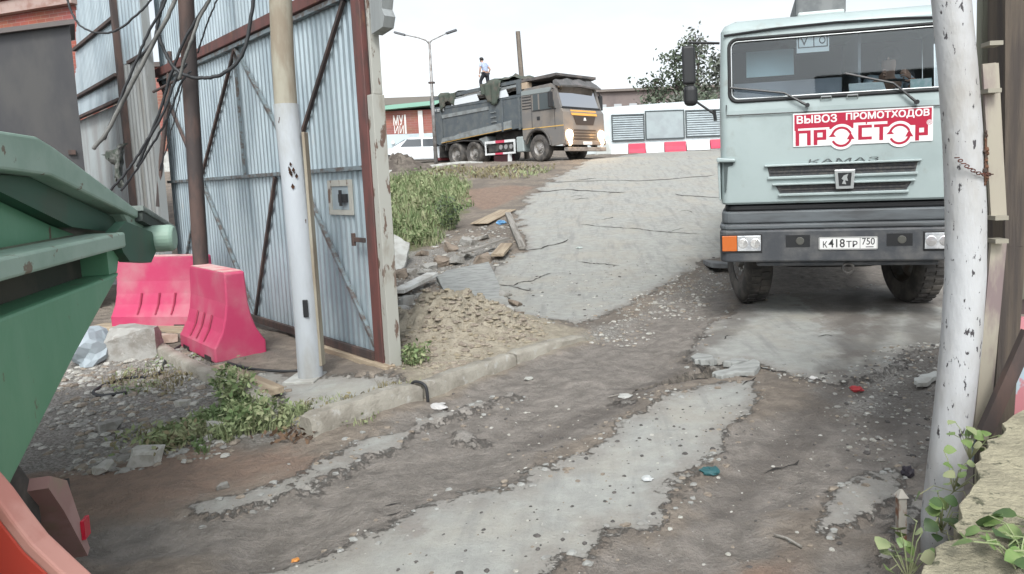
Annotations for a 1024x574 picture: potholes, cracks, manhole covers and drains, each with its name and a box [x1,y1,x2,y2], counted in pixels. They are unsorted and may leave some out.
crack [530,217,695,250]
crack [537,175,717,211]
